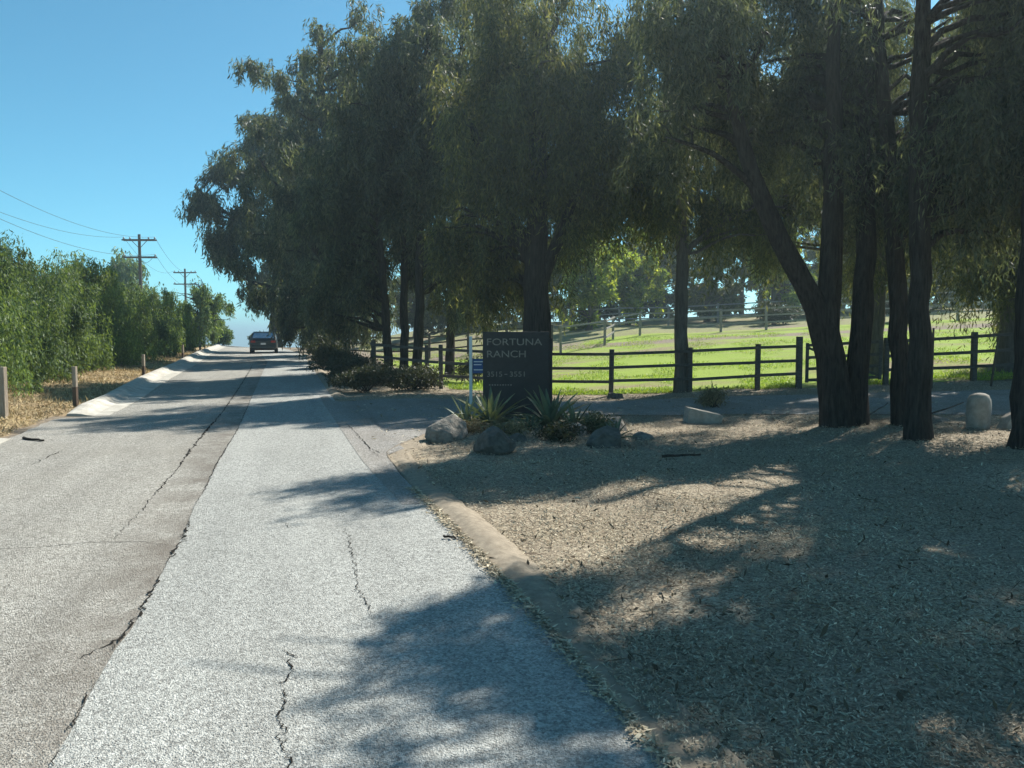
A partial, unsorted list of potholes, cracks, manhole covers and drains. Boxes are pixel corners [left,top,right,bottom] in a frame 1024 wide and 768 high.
crack [5,366,256,768]
crack [345,532,372,618]
crack [276,647,299,768]
